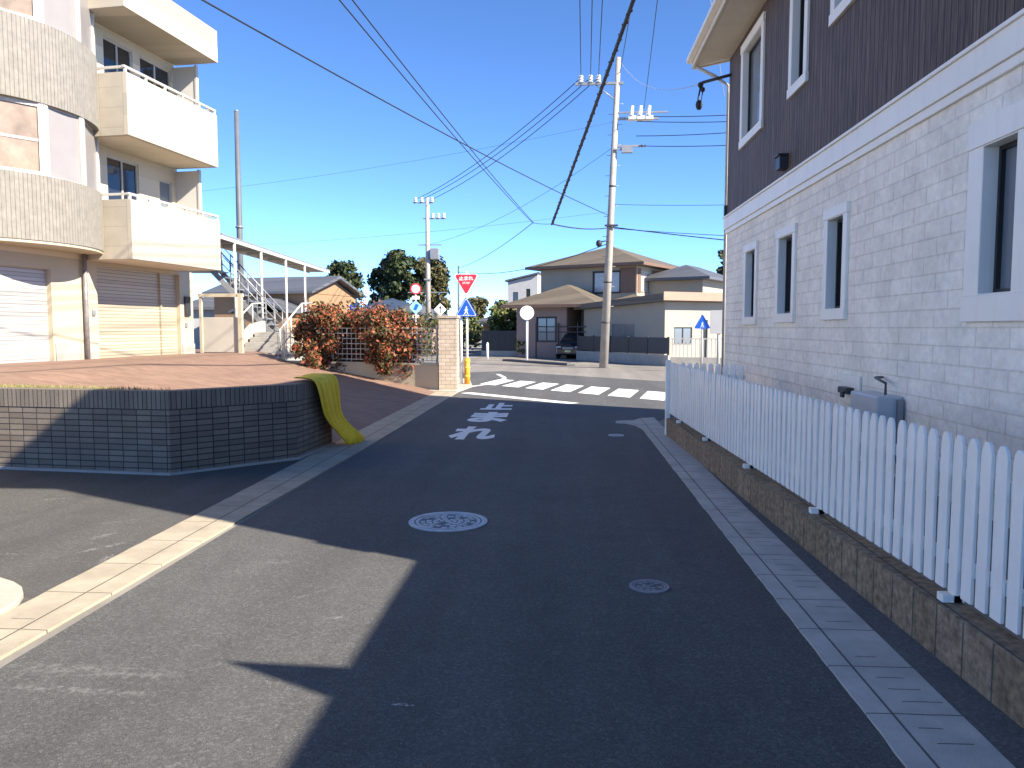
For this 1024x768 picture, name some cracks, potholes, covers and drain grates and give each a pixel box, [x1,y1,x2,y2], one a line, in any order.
manhole cover [409,511,487,532]
manhole cover [629,579,669,594]
